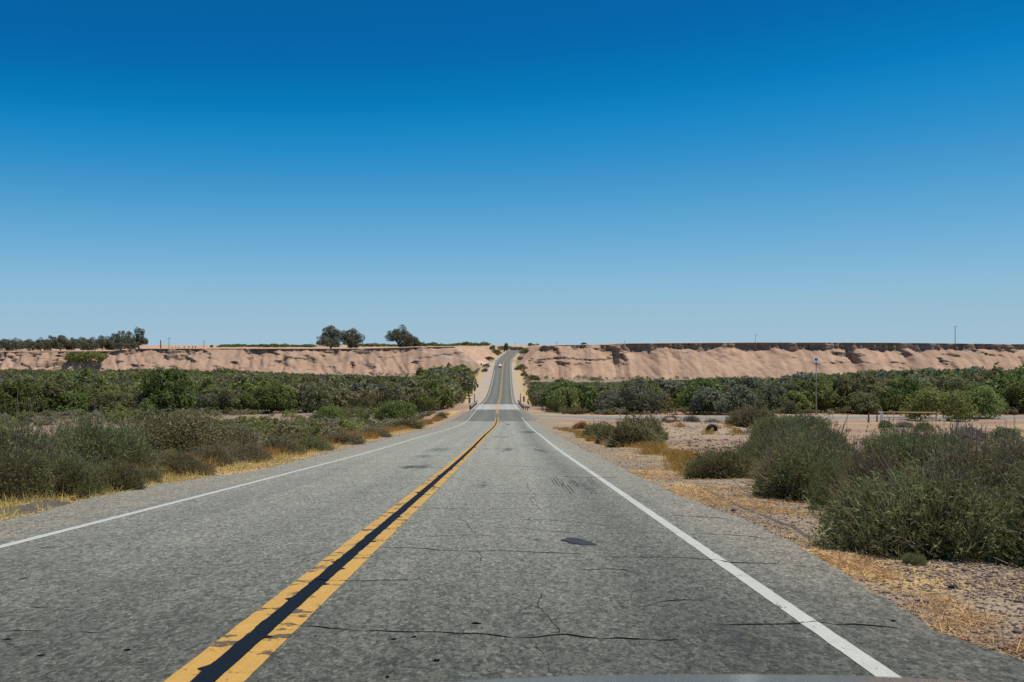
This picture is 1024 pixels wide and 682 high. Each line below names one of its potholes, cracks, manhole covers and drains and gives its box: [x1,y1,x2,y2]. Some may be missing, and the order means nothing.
crack [721,621,917,632]
crack [310,466,826,674]
